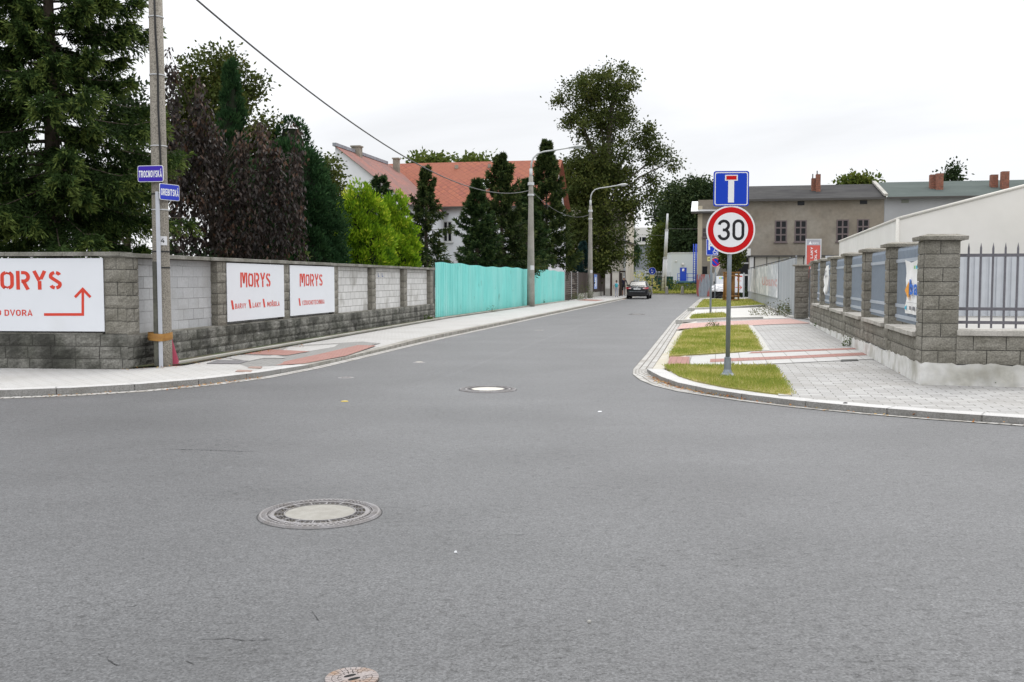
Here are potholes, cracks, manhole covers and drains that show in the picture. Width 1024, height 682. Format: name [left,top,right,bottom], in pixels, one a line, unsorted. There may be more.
utility cover [325,667,379,682]
manhole cover [256,499,383,529]
